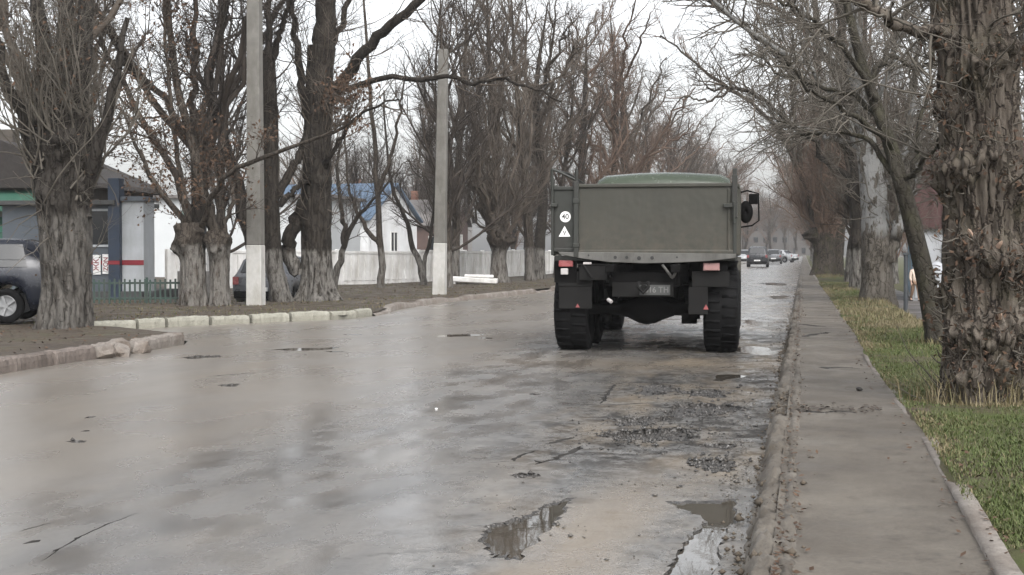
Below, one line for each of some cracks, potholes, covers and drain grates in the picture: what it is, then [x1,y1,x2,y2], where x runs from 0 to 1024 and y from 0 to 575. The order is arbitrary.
pothole [664,498,738,575]
pothole [477,497,577,561]
pothole [663,399,751,418]
pothole [607,415,668,426]
crack [567,382,675,406]
crack [22,515,131,561]
pothole [686,456,737,473]
pothole [634,385,680,396]
pothole [596,424,702,443]
pothole [679,388,731,398]
crack [489,437,583,465]
pothole [510,470,541,478]
